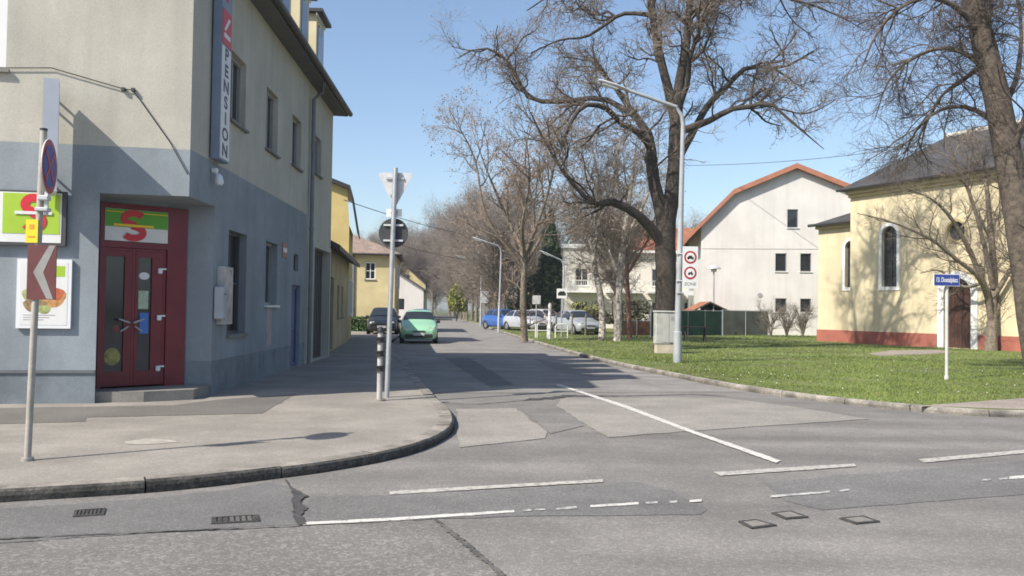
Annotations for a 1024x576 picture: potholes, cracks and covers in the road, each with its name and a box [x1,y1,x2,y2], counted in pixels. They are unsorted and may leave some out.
utility cover [738,519,777,530]
drain grate [211,514,260,524]
utility cover [772,510,809,520]
utility cover [839,515,880,525]
drain grate [73,508,106,517]
